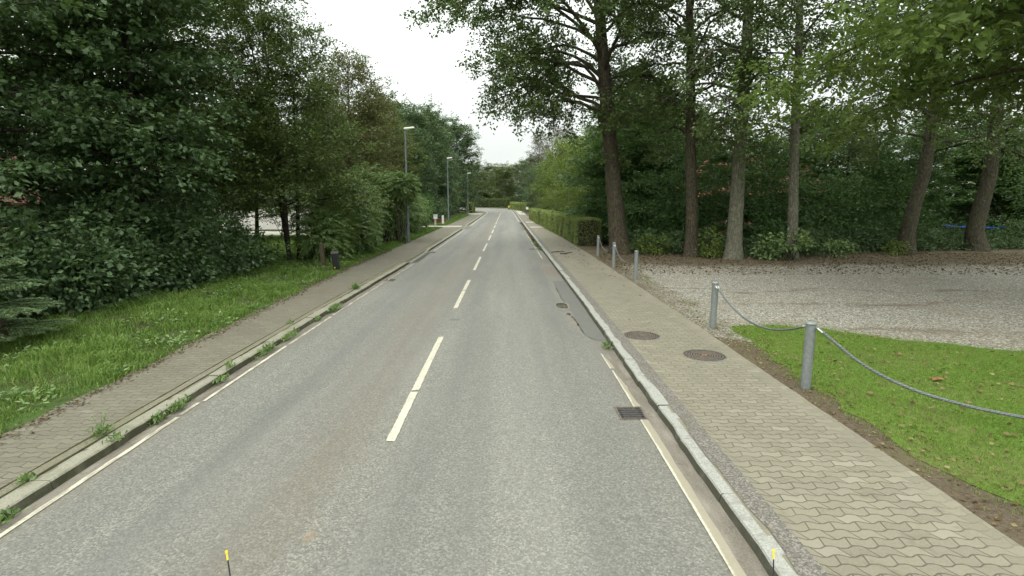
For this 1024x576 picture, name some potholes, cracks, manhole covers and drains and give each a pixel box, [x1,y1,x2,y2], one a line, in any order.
drain grate [614,407,649,420]
manhole cover [682,349,727,362]
manhole cover [623,331,660,340]
